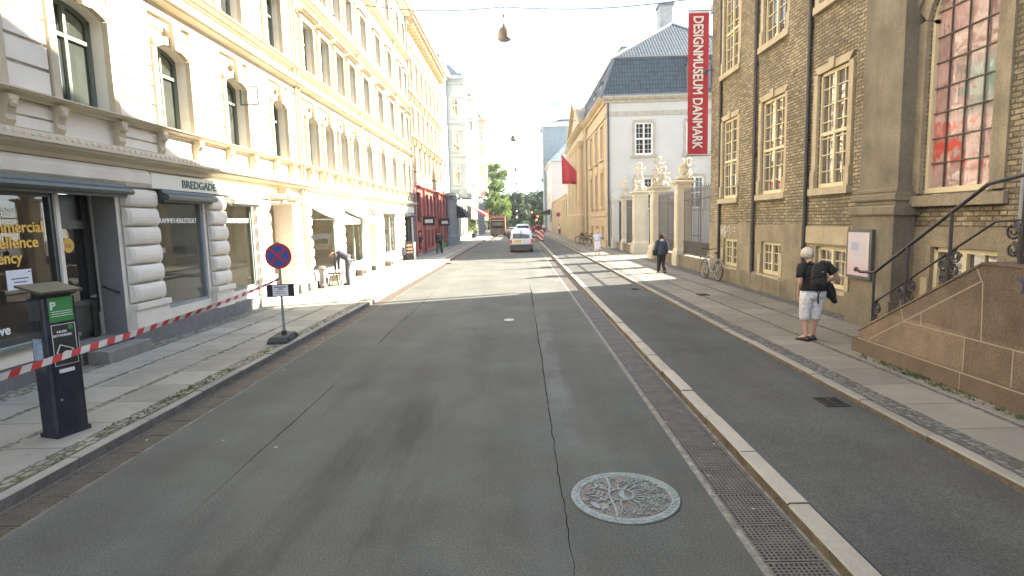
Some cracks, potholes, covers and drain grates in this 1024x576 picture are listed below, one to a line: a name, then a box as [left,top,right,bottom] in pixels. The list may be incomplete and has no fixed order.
manhole cover [570,472,682,525]
drain grate [813,397,851,407]
crack [530,288,575,576]
